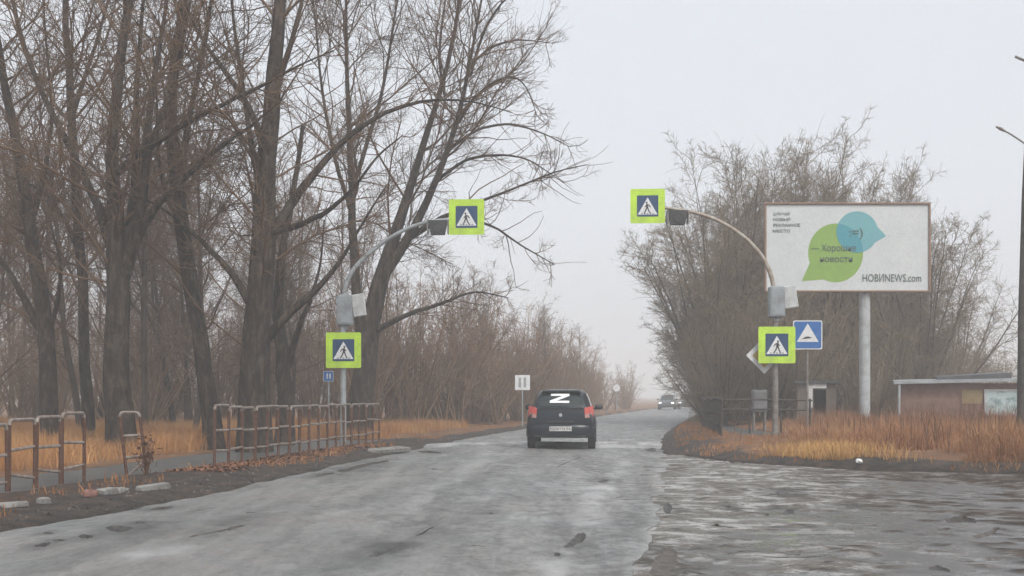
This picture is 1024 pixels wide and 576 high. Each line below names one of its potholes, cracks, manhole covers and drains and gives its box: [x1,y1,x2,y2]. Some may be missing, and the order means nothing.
pothole [945,515,976,523]
pothole [563,532,587,548]
